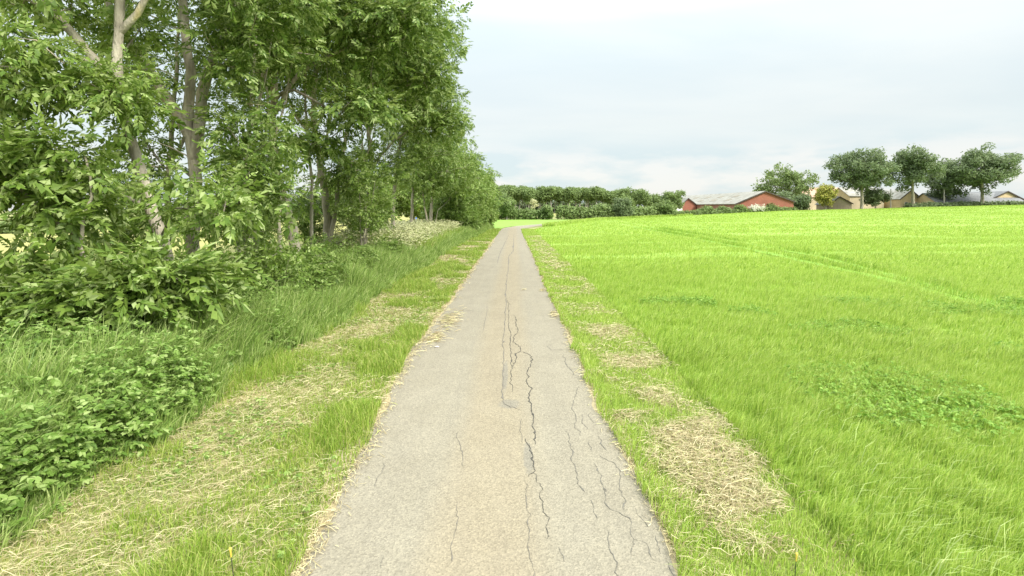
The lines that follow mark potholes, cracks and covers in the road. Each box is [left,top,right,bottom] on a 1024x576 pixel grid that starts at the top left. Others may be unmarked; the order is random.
crack [507,301,674,575]
